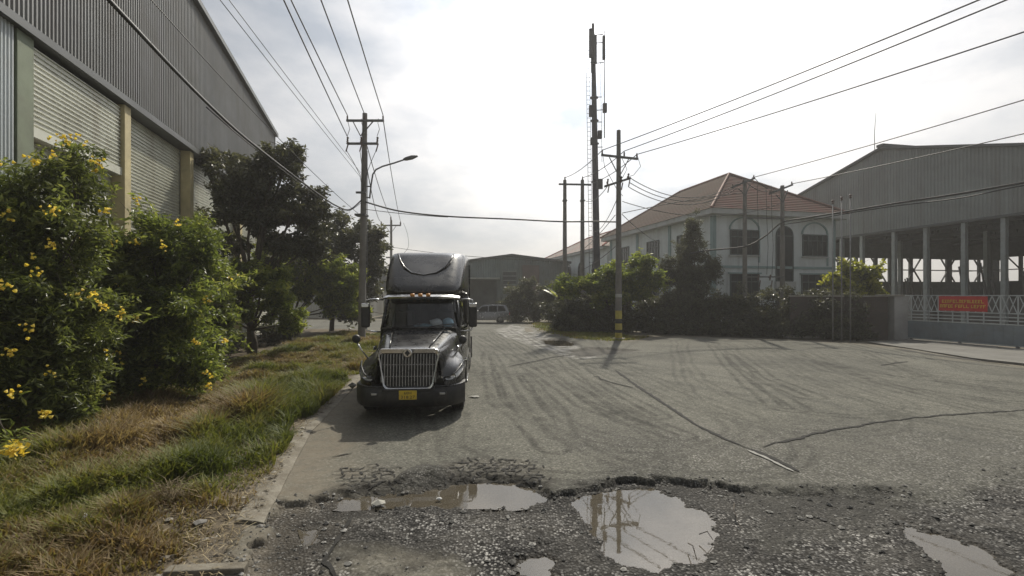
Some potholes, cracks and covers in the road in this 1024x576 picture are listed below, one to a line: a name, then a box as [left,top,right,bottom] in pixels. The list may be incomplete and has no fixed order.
crack [596,371,1024,471]
pothole [885,525,1017,576]
pothole [316,481,558,524]
pothole [558,475,745,576]
pothole [511,565,561,576]
